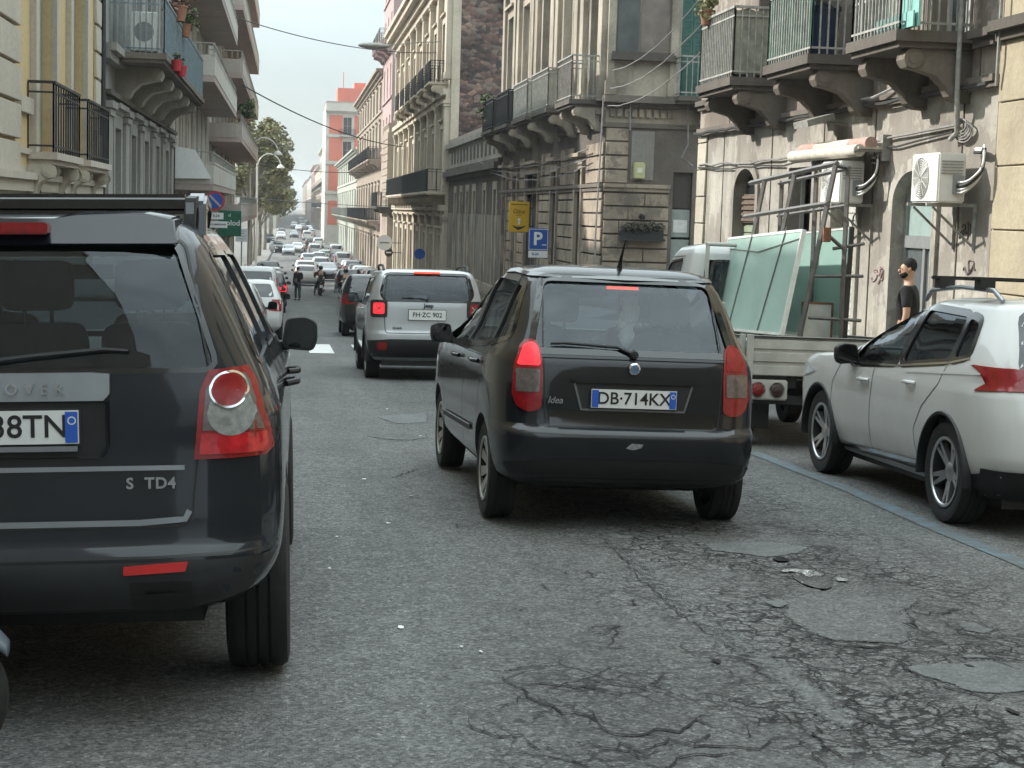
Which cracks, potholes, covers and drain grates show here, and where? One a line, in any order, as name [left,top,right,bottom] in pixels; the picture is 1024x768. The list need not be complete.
crack [765,593,1018,713]
pothole [792,572,833,591]
crack [464,670,1015,768]
crack [607,544,742,663]
crack [583,625,628,648]
